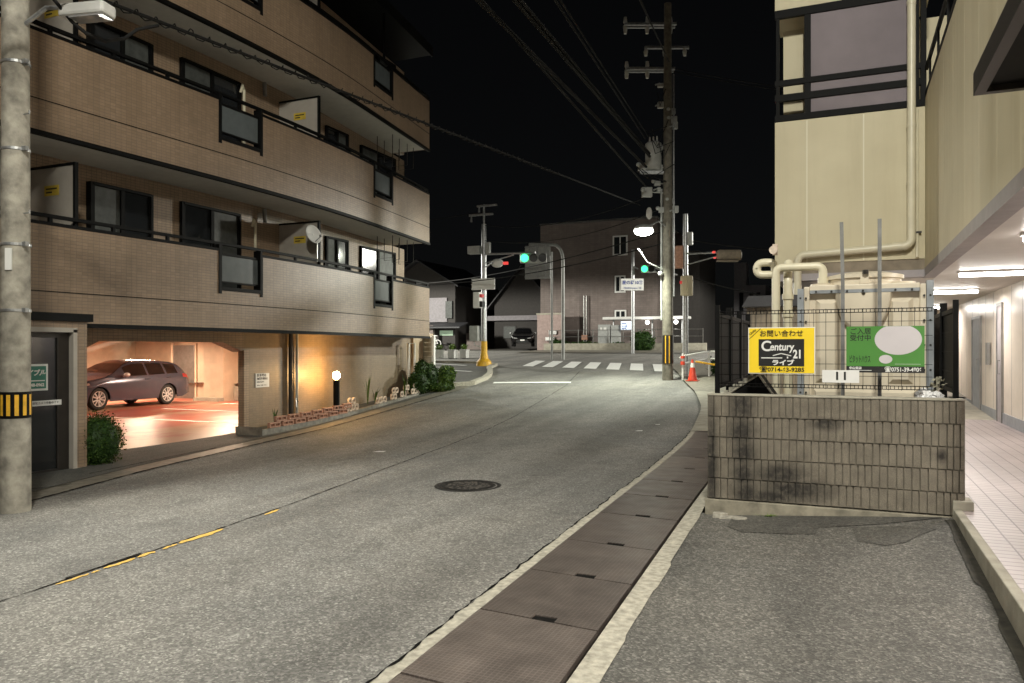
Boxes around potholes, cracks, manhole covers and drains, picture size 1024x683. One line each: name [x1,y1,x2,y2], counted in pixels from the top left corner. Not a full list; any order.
manhole cover [434,480,501,492]
